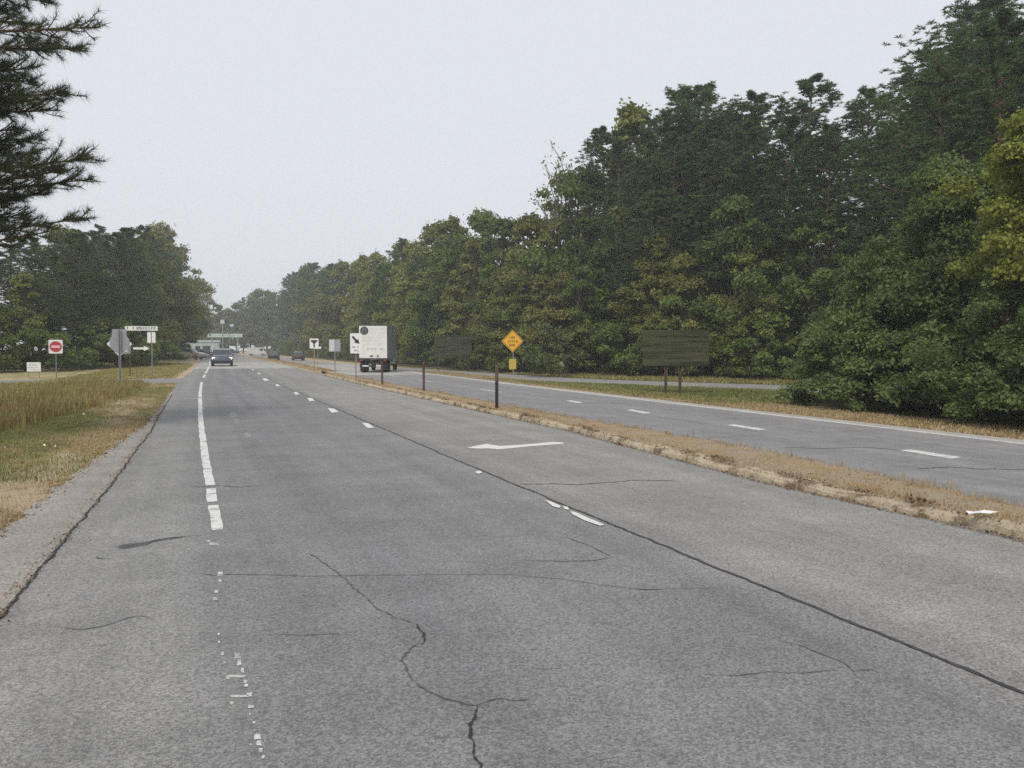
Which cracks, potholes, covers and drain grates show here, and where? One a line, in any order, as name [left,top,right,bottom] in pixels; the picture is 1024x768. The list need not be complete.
crack [291,536,702,768]
crack [712,640,888,675]
